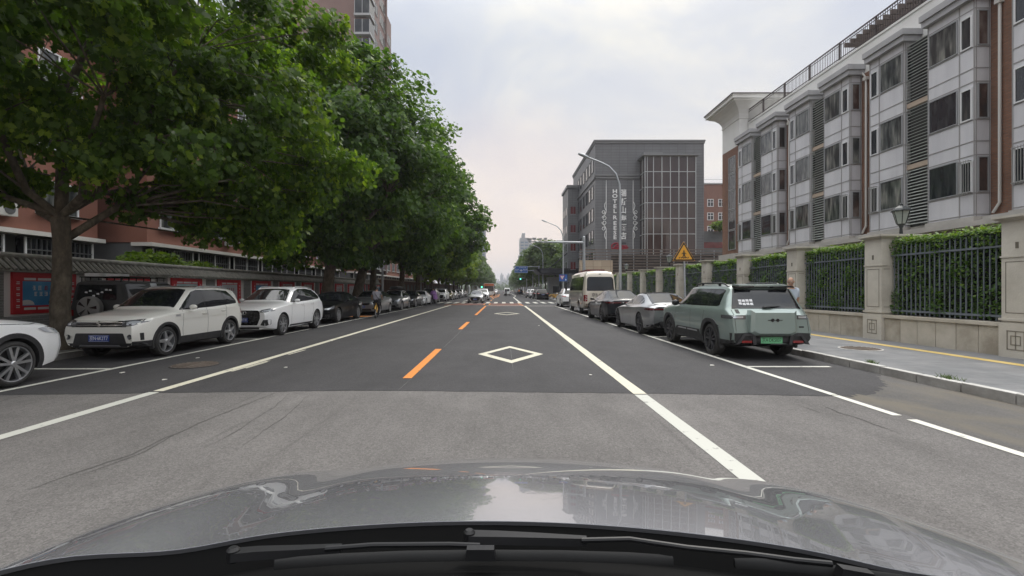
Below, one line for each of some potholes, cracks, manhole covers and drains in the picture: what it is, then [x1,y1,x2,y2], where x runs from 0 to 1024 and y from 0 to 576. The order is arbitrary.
manhole cover [168,361,221,369]
crack [34,393,303,488]
